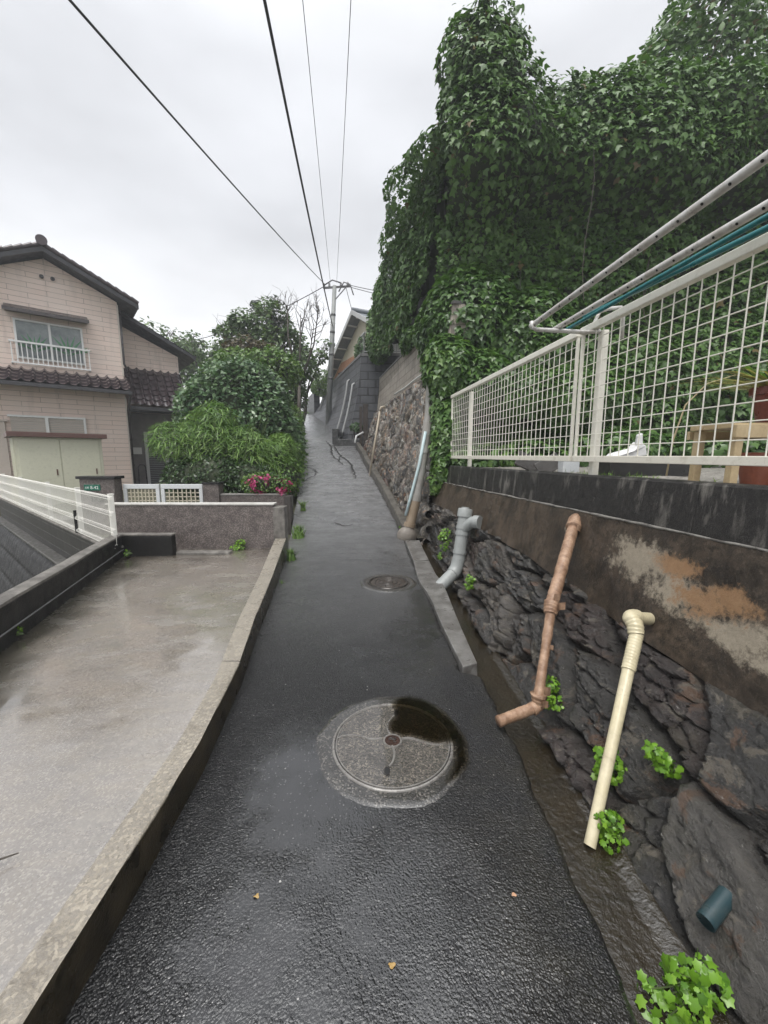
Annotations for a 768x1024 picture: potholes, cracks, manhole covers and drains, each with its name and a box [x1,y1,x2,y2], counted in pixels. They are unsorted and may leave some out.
manhole cover [315,696,468,808]
crack [301,441,357,480]
manhole cover [360,574,417,592]
